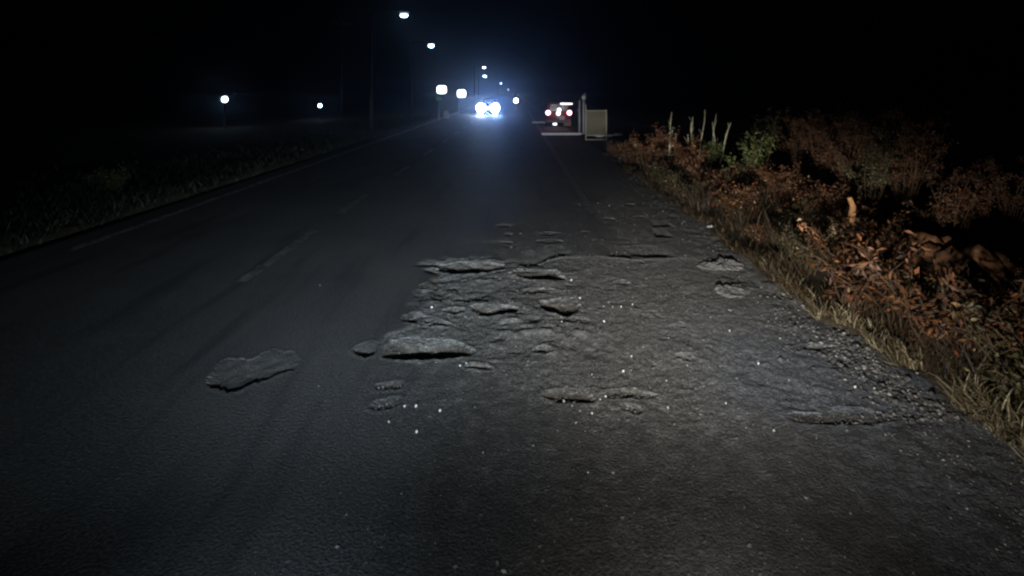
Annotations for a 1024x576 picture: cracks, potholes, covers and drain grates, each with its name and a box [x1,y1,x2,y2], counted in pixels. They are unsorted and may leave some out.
pothole [367,377,411,393]
pothole [534,295,586,319]
pothole [594,385,666,403]
pothole [376,335,481,363]
pothole [536,384,601,407]
pothole [362,393,412,415]
pothole [428,259,518,276]
pothole [198,347,307,397]
pothole [777,403,905,429]
crack [440,217,689,305]
